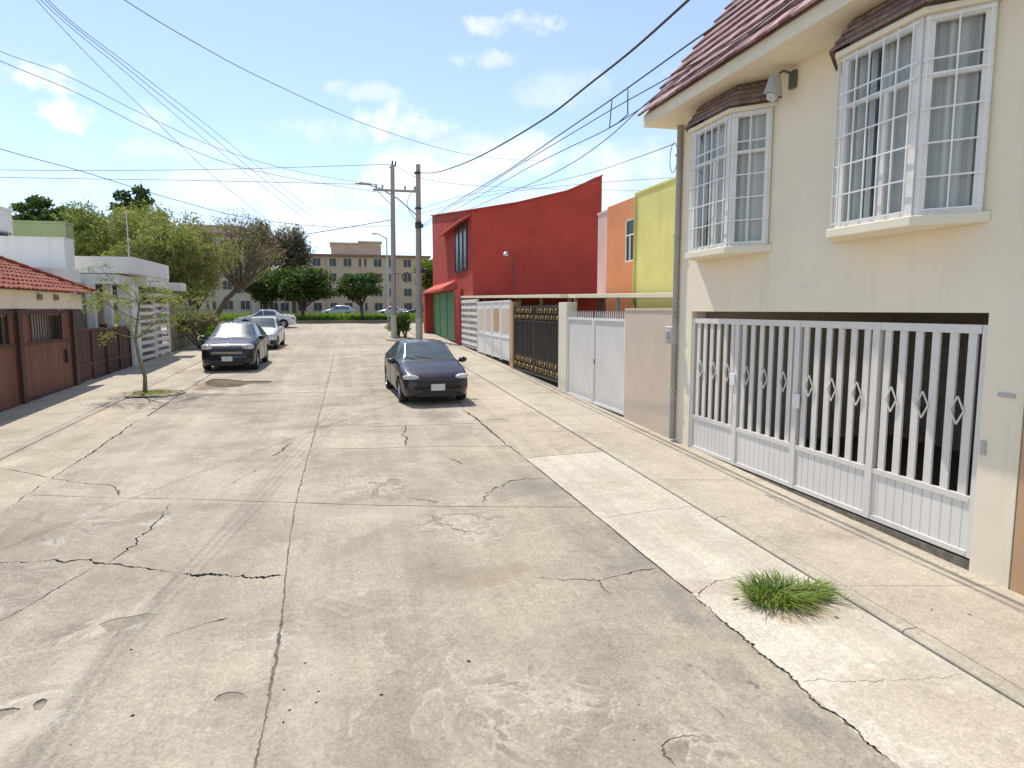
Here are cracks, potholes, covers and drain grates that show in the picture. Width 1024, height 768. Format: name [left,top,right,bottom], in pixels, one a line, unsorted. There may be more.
pothole [214,691,248,703]
pothole [0,707,20,720]
crack [0,351,335,768]
crack [661,735,701,766]
pothole [33,698,47,710]
crack [533,568,654,592]
crack [454,410,521,455]
